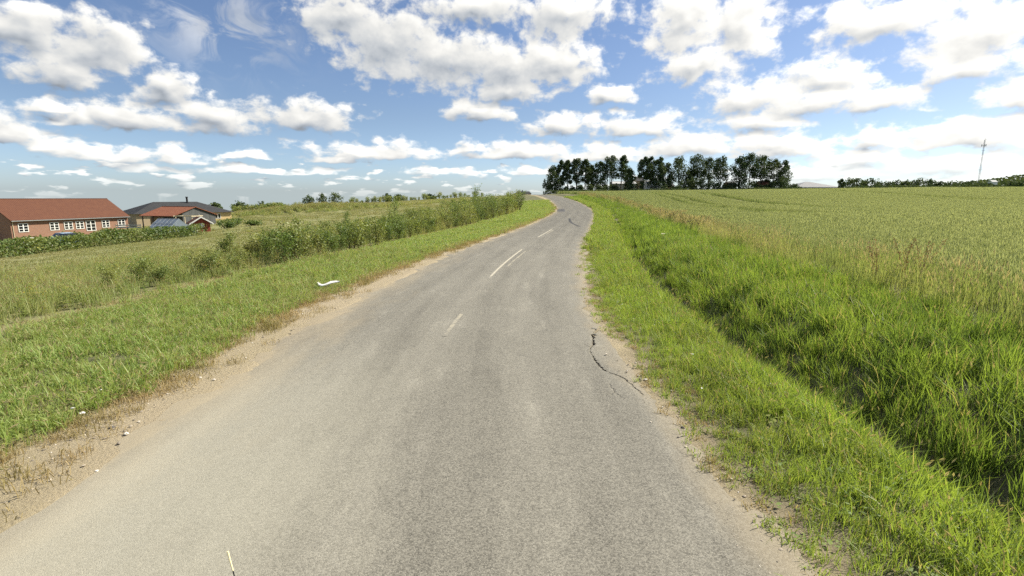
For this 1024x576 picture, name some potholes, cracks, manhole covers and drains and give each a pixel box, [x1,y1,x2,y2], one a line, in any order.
crack [584,327,644,399]
